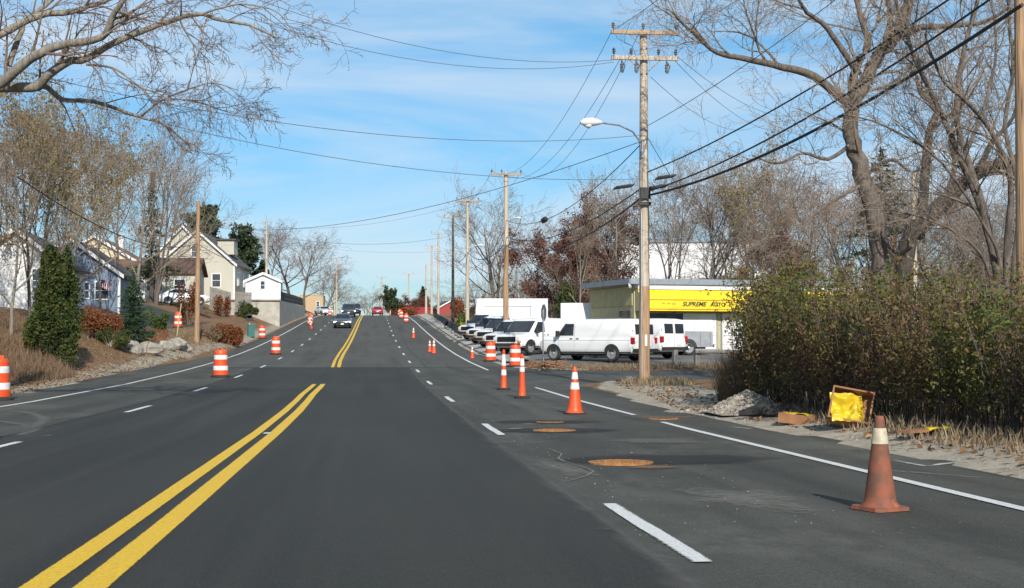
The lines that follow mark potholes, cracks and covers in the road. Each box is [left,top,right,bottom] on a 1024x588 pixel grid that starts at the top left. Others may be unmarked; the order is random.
crack [551,449,594,481]
